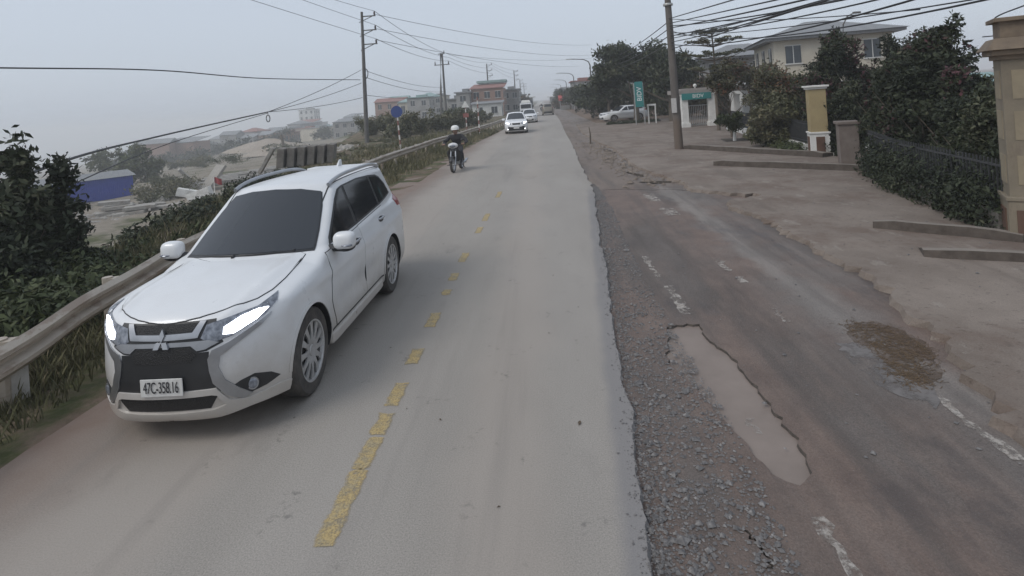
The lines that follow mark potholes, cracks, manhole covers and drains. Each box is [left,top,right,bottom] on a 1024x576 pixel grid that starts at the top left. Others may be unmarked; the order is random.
pothole [665,323,812,485]
crack [744,530,774,569]
